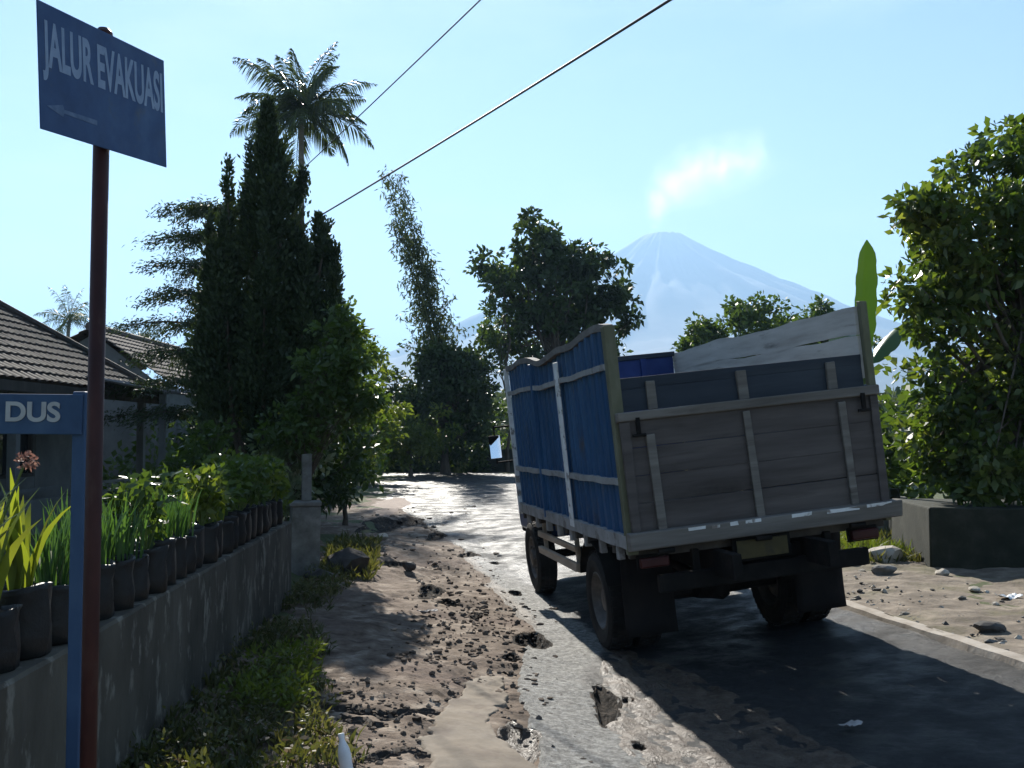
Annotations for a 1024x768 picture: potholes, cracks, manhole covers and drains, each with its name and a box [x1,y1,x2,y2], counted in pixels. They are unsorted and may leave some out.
pothole [497,721,542,764]
pothole [592,684,623,729]
pothole [513,631,553,649]
